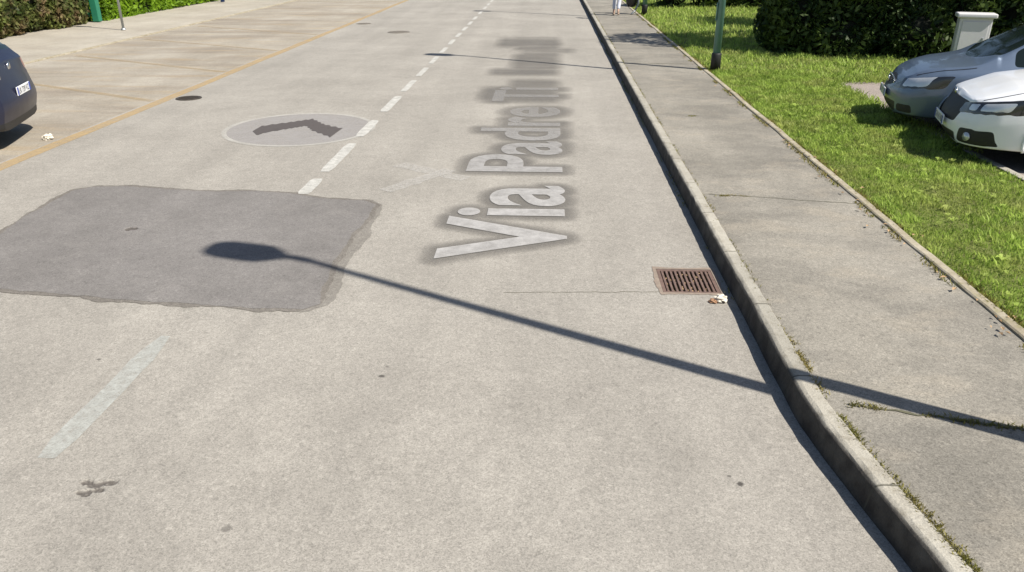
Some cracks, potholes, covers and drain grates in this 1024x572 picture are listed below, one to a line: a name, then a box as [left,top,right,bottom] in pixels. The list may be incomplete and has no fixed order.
drain grate [652,266,723,295]
